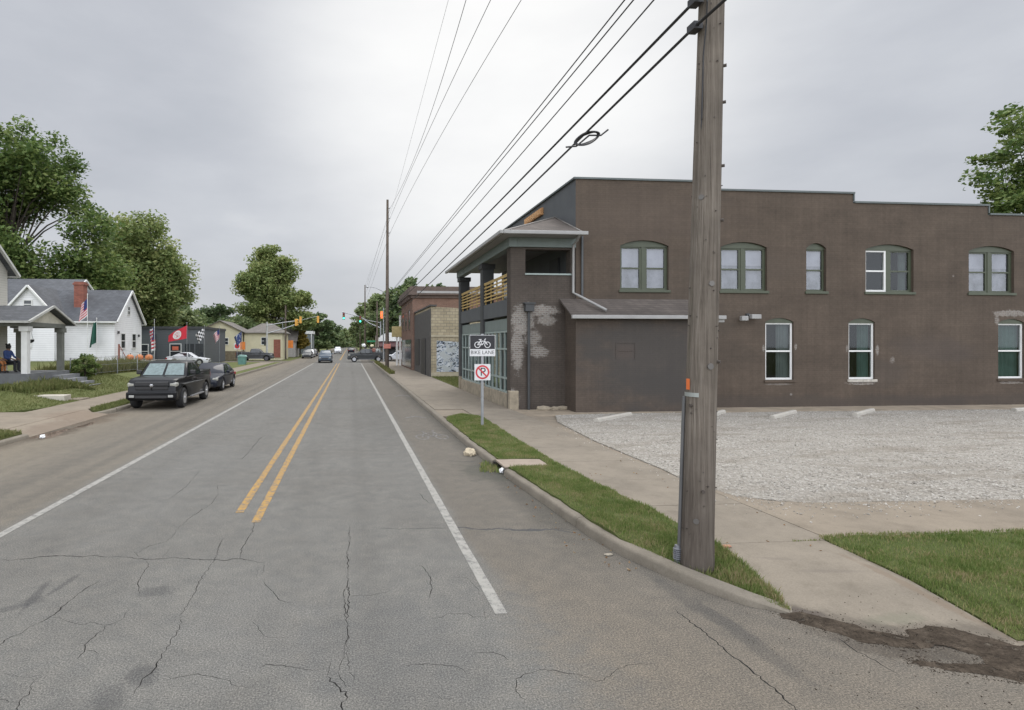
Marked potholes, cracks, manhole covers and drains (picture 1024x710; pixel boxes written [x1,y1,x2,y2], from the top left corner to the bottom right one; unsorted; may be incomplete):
crack [411,652,652,698]
crack [262,527,391,710]
drain grate [493,459,547,475]
crack [1,486,289,659]
